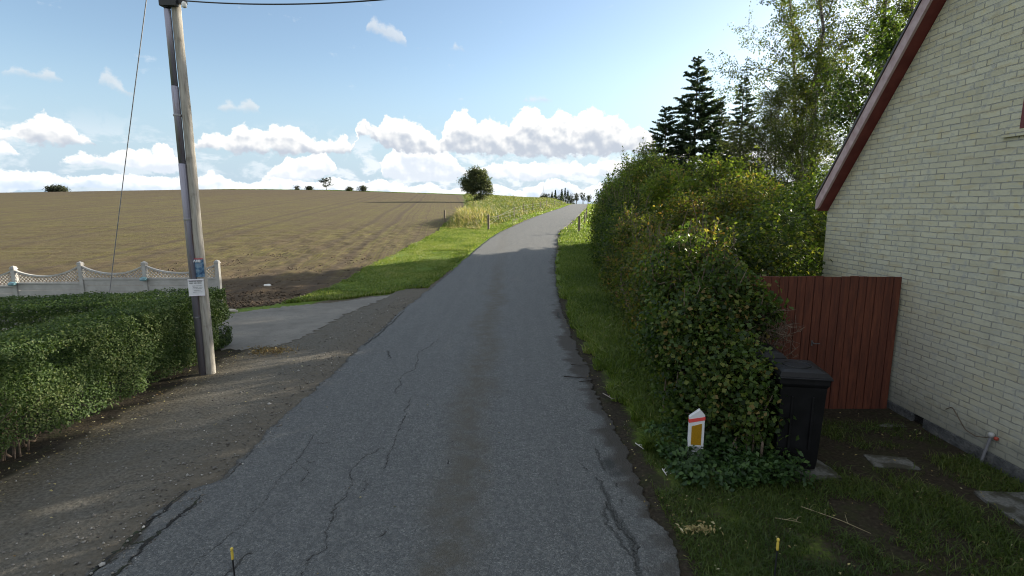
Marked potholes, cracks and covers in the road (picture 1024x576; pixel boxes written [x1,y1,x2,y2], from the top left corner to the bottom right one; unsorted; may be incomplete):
crack [88,435,330,576]
crack [301,311,437,575]
crack [582,448,643,576]
